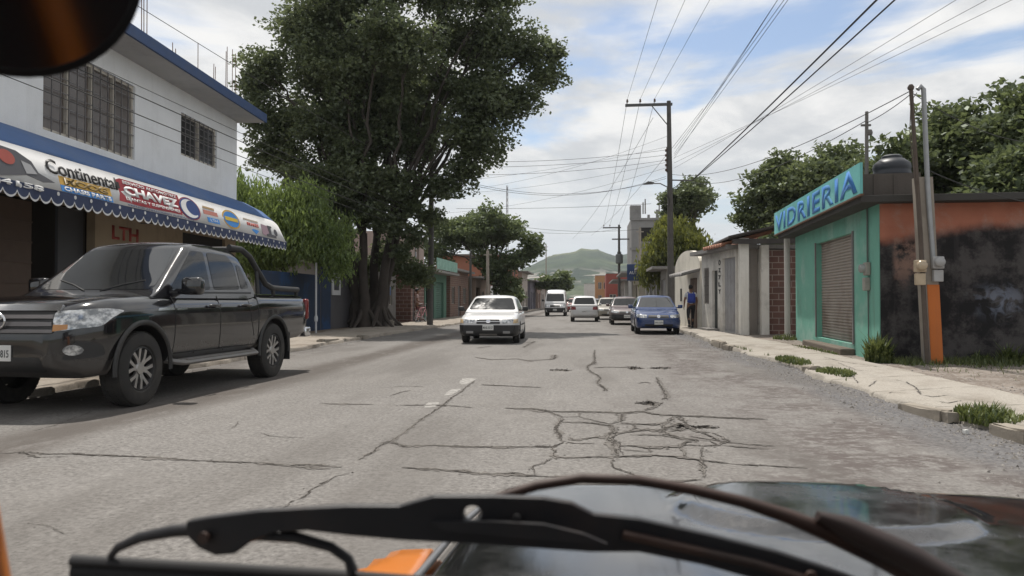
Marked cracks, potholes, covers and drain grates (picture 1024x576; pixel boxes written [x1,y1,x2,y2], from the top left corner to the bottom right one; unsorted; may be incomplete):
crack [476,341,558,362]
crack [6,350,804,507]
